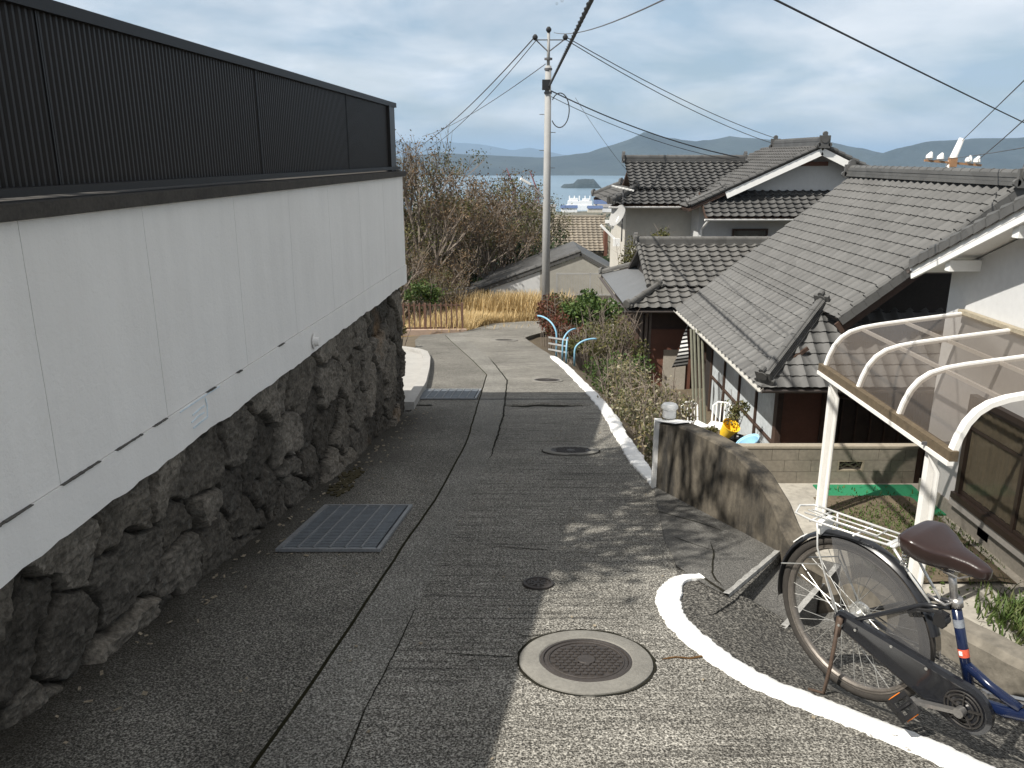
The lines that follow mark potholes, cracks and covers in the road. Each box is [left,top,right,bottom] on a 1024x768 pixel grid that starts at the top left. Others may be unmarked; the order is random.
drain grate [420,388,481,400]
crack [341,608,416,768]
crack [646,507,721,584]
manhole cover [517,629,657,697]
drain grate [275,504,413,552]
crack [487,359,575,462]
manhole cover [523,576,554,590]
manhole cover [542,446,601,456]
